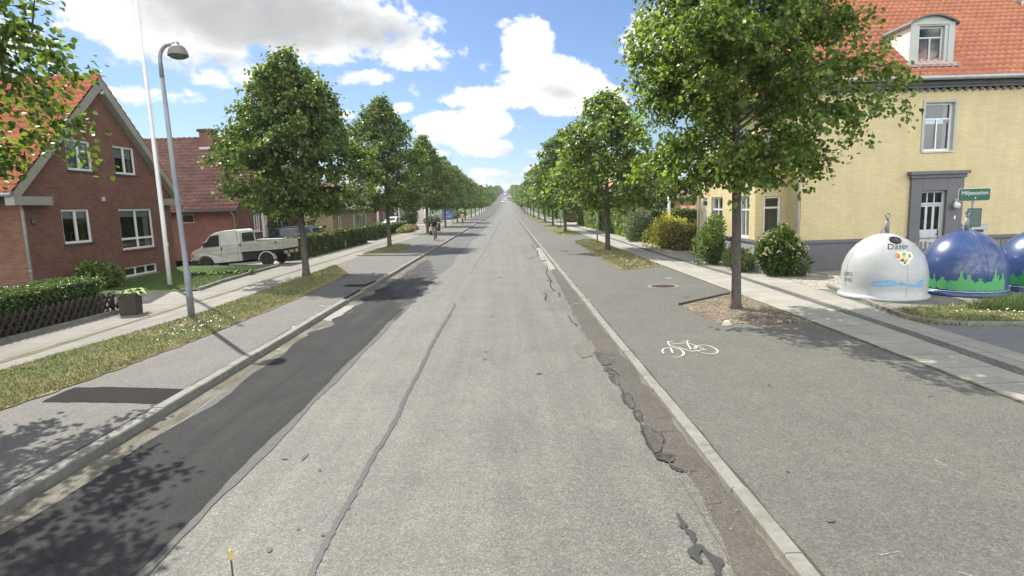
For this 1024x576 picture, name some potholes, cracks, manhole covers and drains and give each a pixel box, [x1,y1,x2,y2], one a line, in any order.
crack [599,352,734,571]
